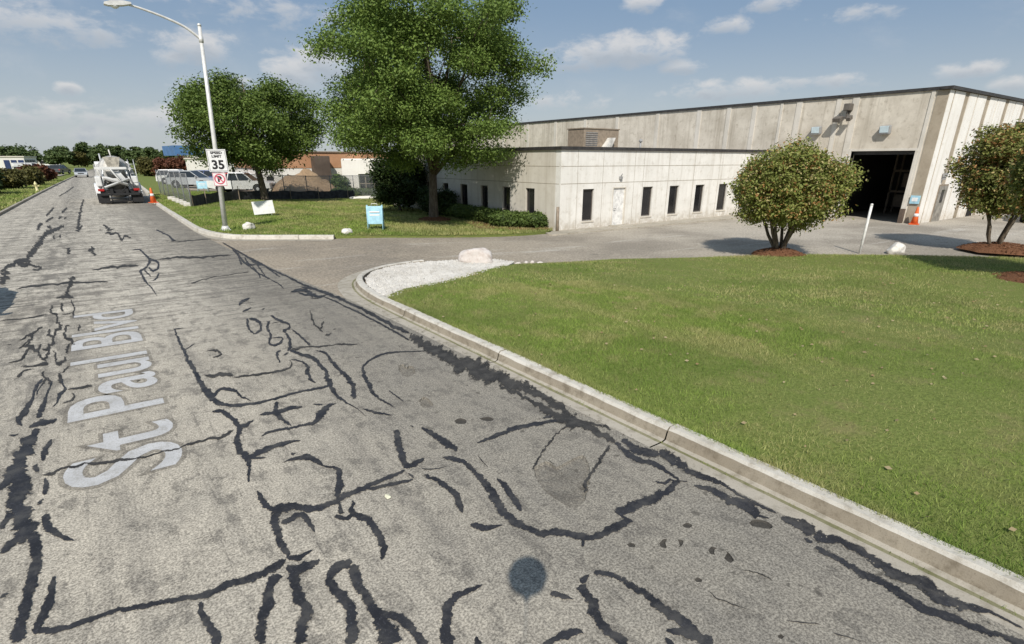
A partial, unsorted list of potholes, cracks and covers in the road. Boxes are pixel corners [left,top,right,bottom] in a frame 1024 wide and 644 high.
crack [788,620,859,641]
pothole [742,516,780,533]
pothole [474,415,498,423]
crack [0,186,421,407]
pothole [450,416,472,426]
